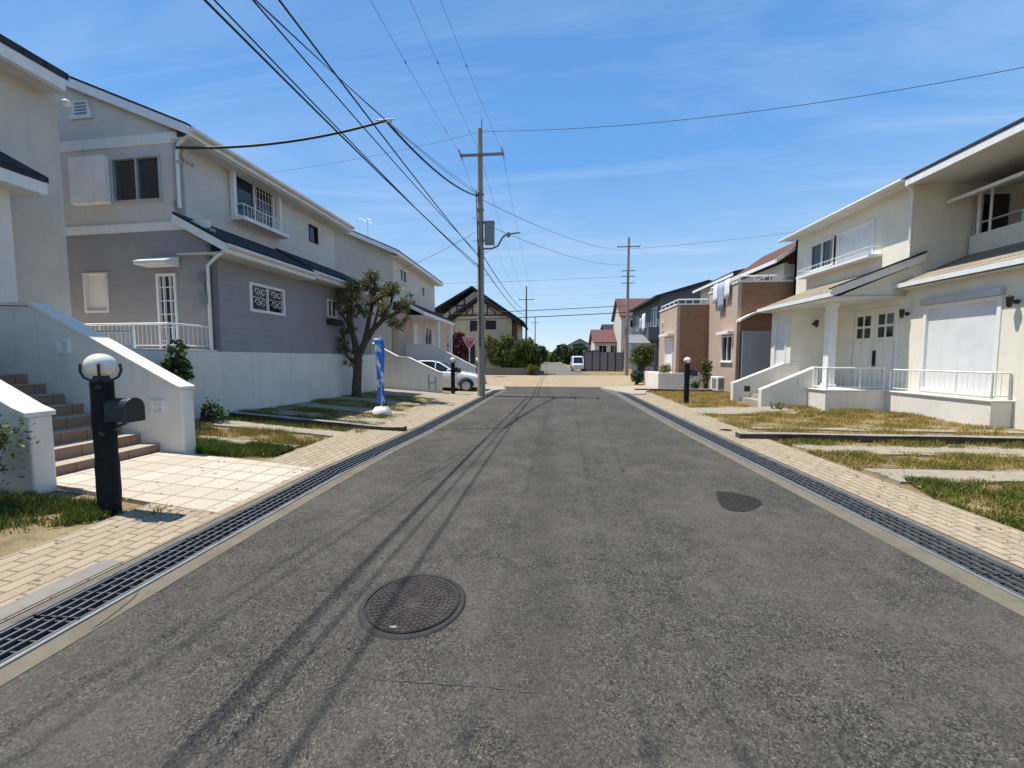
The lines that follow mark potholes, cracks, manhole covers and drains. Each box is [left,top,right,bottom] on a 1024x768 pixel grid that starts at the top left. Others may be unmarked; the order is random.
crack [349,676,540,693]
drain grate [269,472,341,500]
drain grate [725,448,775,464]
drain grate [798,484,897,520]
drain grate [321,454,375,473]
drain grate [35,540,219,621]
drain grate [0,616,78,664]
drain grate [187,498,294,542]
drain grate [685,427,716,437]
drain grate [978,574,1024,597]
drain grate [701,436,742,448]
